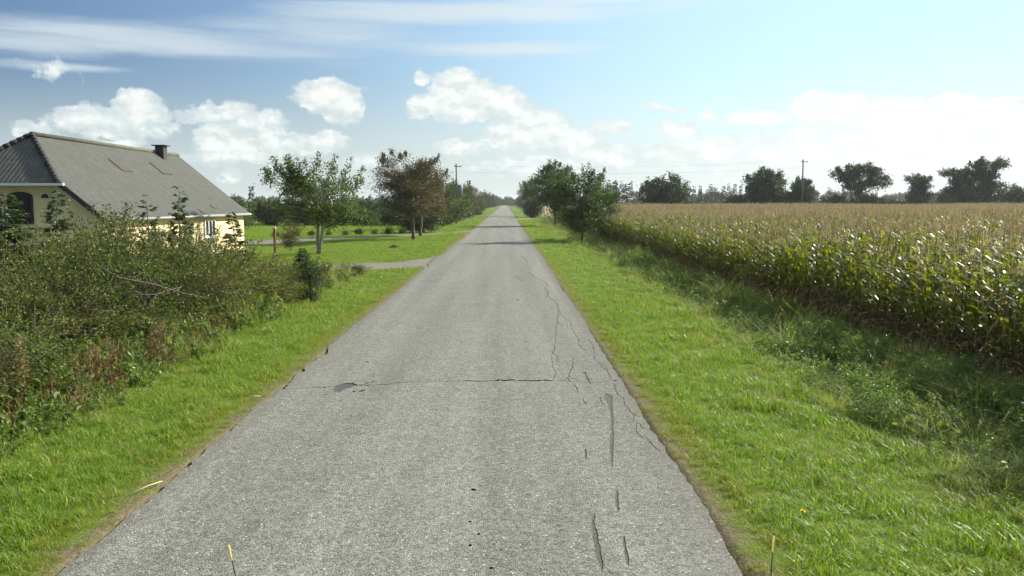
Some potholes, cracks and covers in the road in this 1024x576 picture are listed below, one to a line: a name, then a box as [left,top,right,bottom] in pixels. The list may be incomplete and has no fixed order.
crack [283,259,660,451]
pothole [333,382,357,392]
